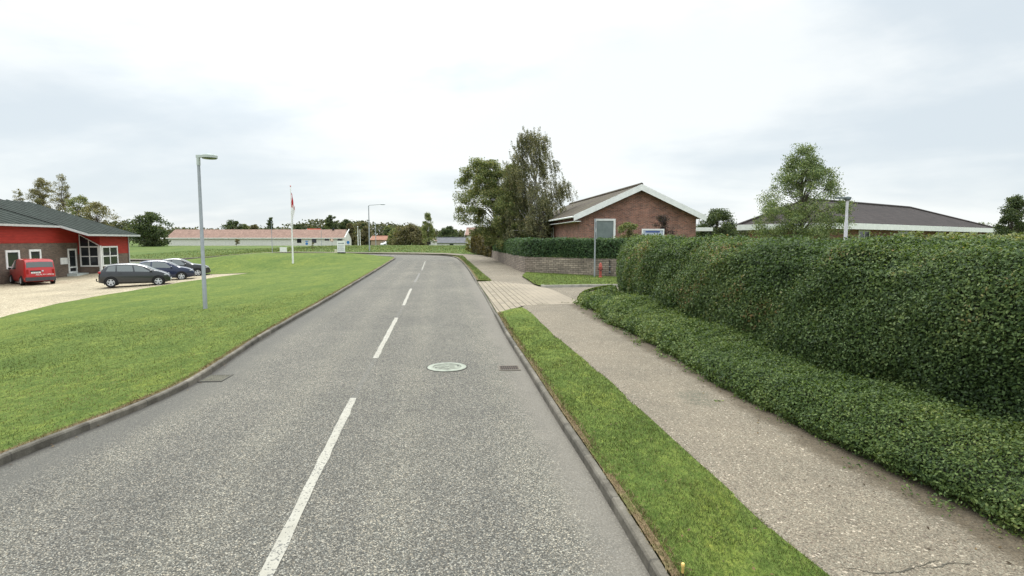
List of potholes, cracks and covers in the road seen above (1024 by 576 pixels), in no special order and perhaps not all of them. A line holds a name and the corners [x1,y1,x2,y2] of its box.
drain grate [197,374,234,383]
manhole cover [426,362,468,372]
crack [841,560,974,574]
